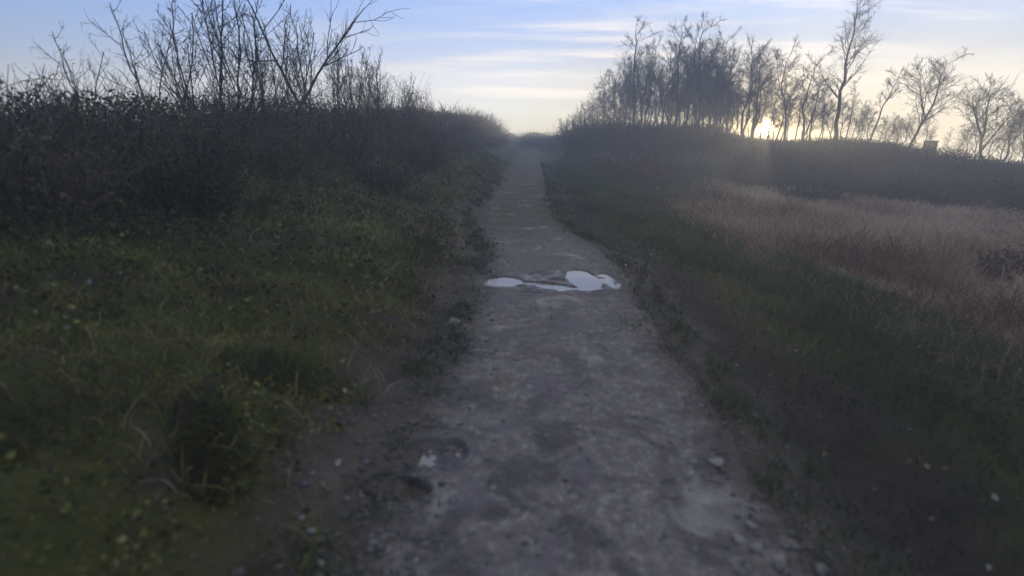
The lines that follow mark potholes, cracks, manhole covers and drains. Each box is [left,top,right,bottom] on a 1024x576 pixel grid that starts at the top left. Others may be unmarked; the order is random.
pothole [468,266,637,295]
pothole [359,472,439,503]
pothole [395,435,475,472]
